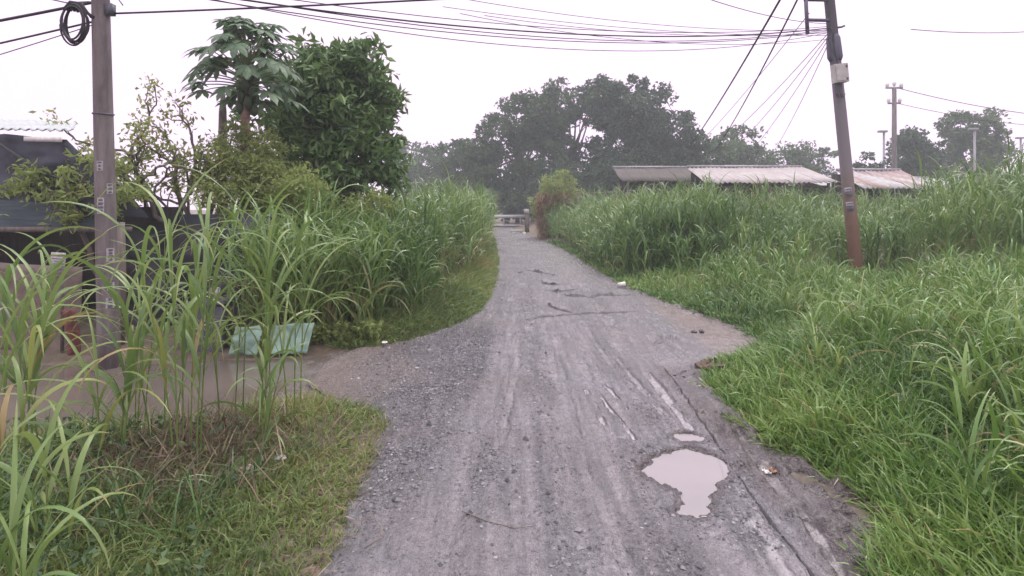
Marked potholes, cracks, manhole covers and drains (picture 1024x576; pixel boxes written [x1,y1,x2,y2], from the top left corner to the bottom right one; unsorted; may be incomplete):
pothole [632,443,741,522]
pothole [666,428,711,445]
crack [663,367,817,576]
crack [512,269,639,321]
